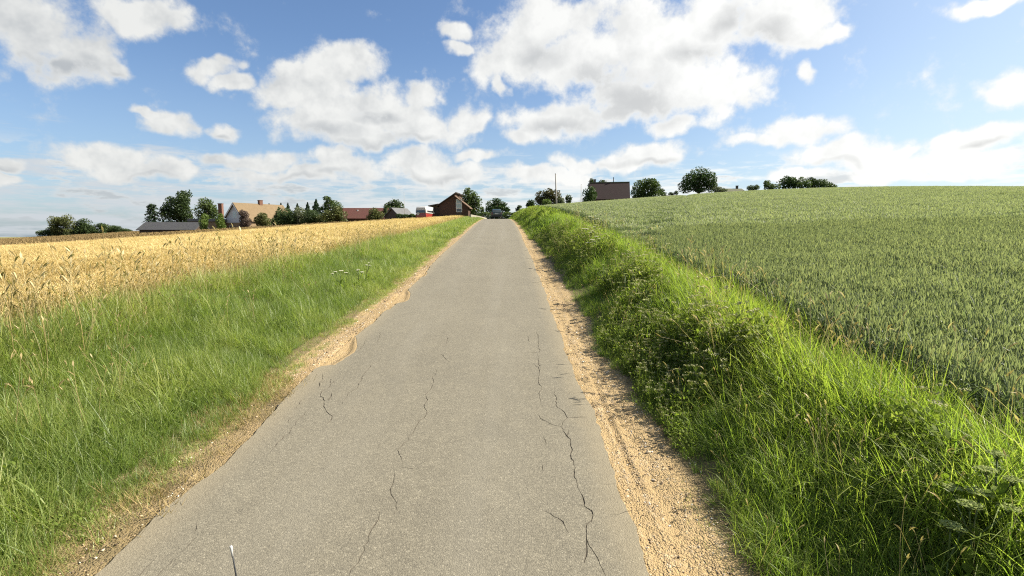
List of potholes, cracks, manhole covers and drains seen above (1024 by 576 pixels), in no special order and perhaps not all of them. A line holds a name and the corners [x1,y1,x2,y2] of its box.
crack [270,333,381,452]
crack [349,338,449,575]
crack [528,332,606,576]
